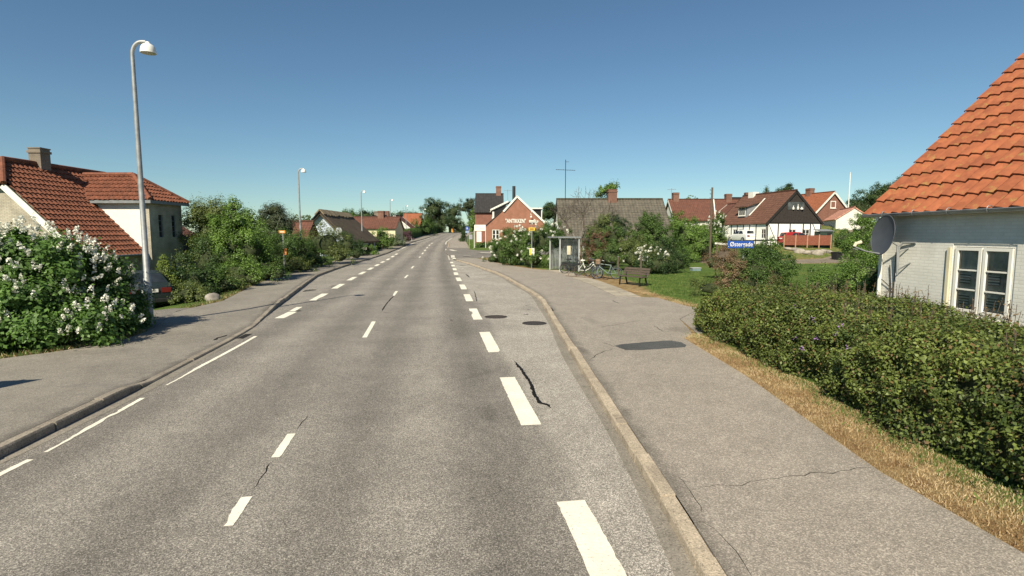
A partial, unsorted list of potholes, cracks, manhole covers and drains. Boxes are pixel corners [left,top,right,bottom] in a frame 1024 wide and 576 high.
crack [662,468,855,575]
